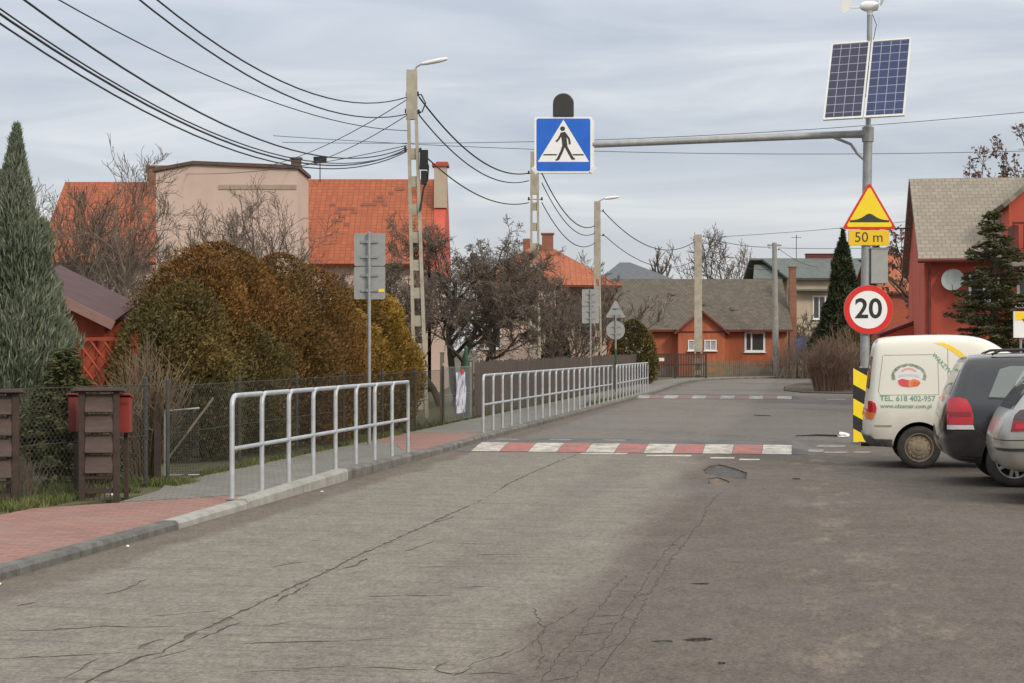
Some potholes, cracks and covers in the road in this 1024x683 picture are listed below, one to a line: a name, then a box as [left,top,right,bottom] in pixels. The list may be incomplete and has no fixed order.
crack [368,488,729,681]
pothole [707,477,731,486]
crack [0,454,577,683]
pothole [703,464,748,479]
